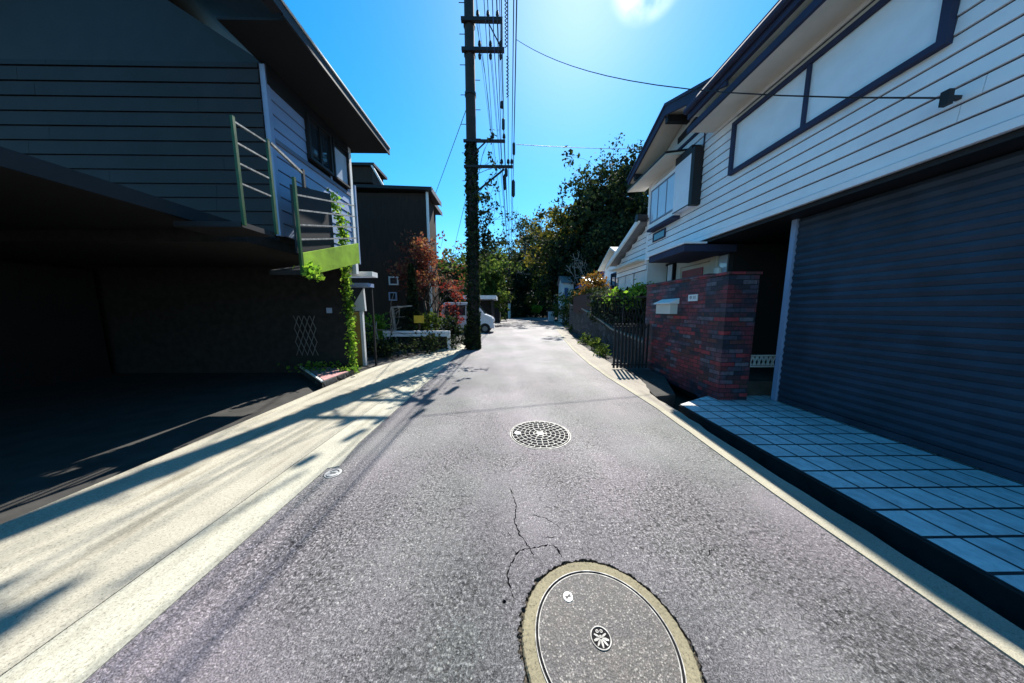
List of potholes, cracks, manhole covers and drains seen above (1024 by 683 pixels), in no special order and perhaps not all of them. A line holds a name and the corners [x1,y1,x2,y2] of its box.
manhole cover [510,421,572,450]
manhole cover [516,558,707,683]
crack [506,489,565,597]
utility cover [323,468,343,478]
